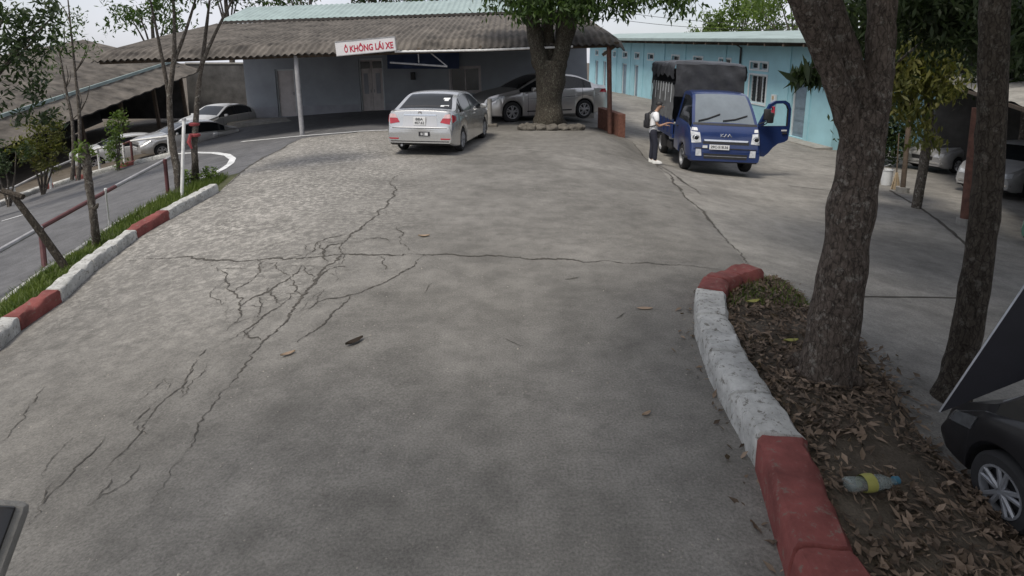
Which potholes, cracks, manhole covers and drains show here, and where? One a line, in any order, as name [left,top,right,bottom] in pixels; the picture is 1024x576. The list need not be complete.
crack [28,176,715,526]
